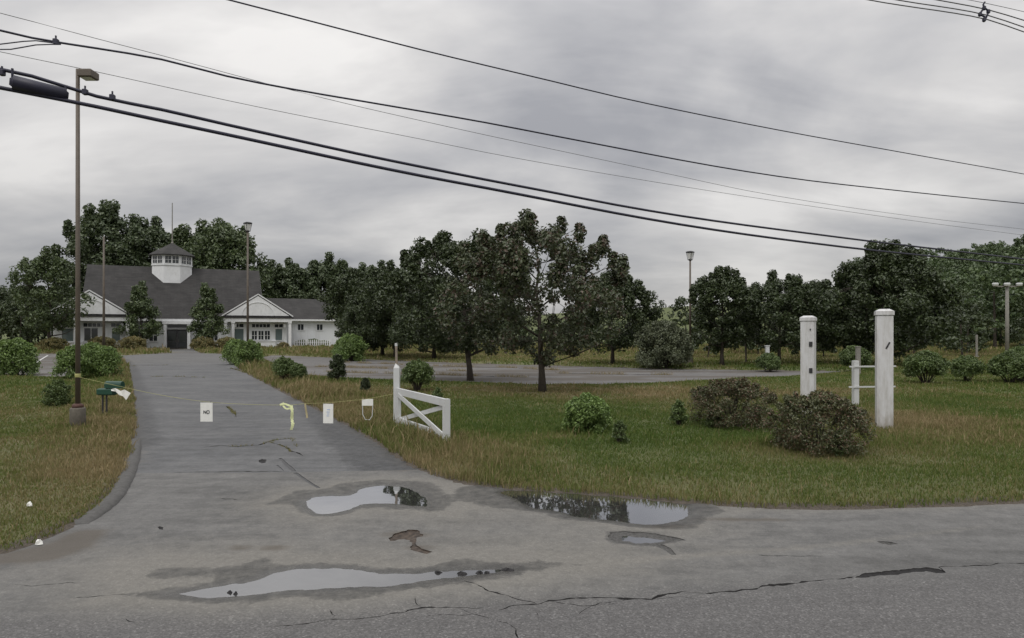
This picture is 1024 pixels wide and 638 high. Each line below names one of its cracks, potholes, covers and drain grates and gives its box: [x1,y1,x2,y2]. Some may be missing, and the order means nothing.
crack [209,437,303,471]
pothole [608,531,684,555]
crack [275,563,1024,638]
pothole [389,530,432,554]
